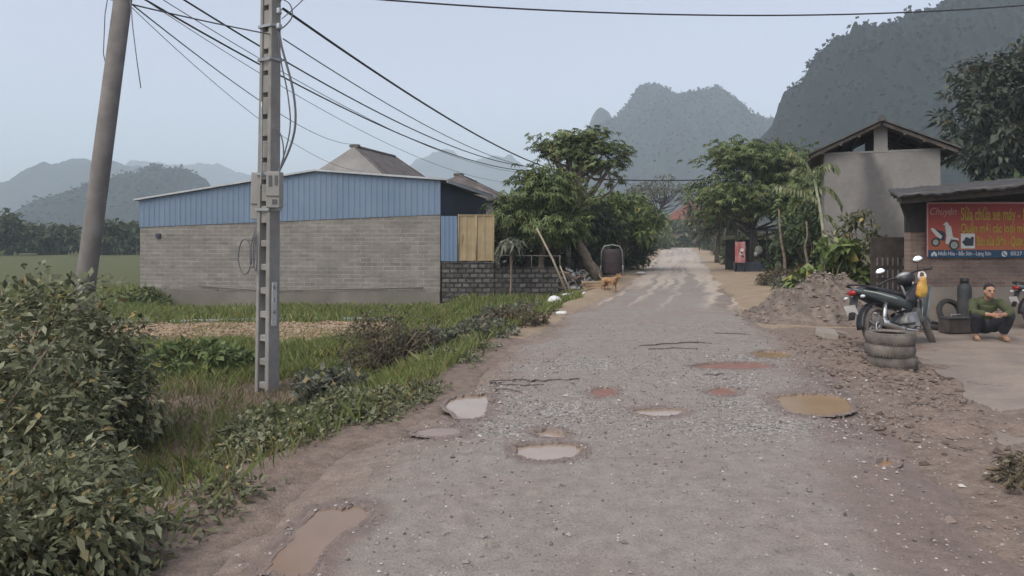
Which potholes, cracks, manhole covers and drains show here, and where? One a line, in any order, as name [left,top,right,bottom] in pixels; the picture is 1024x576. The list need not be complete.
pothole [255,503,375,576]
pothole [630,407,689,418]
pothole [509,441,587,461]
crack [490,378,580,394]
crack [640,333,748,350]
pothole [685,361,774,369]
pothole [439,393,495,420]
pothole [770,392,858,419]
pothole [408,427,465,439]
pothole [588,386,619,398]
pothole [530,427,568,439]
pothole [749,350,800,359]
